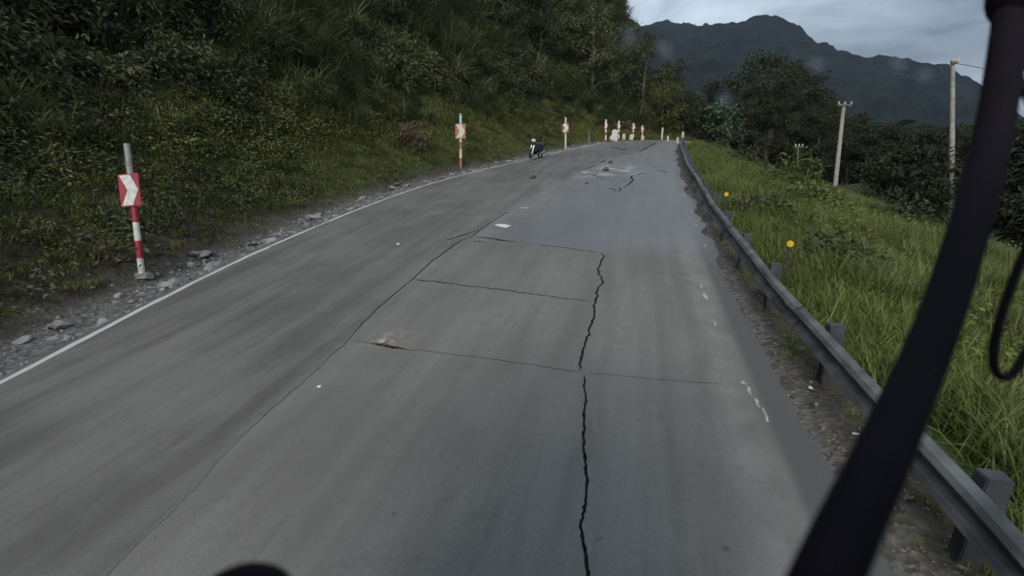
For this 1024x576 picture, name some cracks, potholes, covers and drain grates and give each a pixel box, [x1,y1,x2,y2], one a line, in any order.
crack [106,212,717,576]
crack [590,170,668,191]
